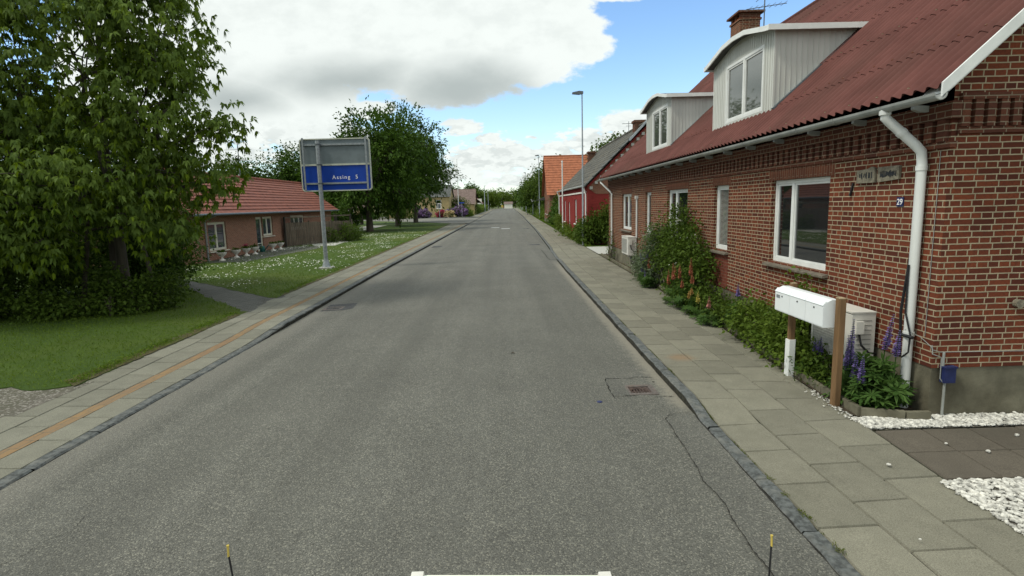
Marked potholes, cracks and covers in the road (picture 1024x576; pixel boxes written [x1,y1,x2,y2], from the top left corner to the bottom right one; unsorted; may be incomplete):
crack [665,412,774,576]
